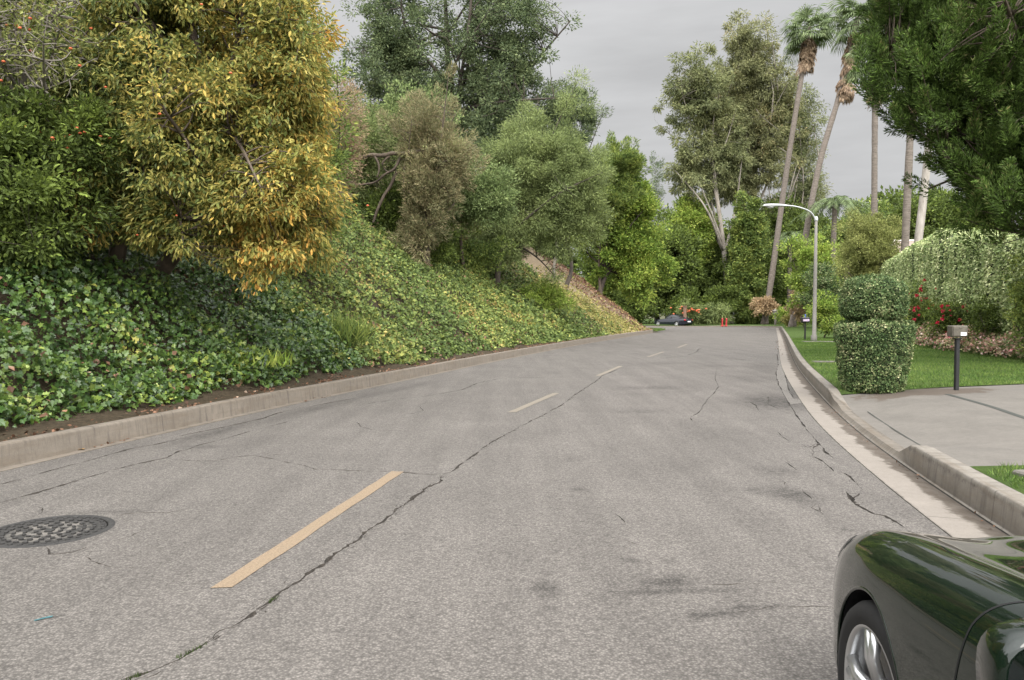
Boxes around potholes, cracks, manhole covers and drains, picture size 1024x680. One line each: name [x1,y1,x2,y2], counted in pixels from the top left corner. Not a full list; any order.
manhole cover [0,515,115,548]
crack [119,369,618,680]
crack [752,350,907,528]
crack [17,531,143,568]
